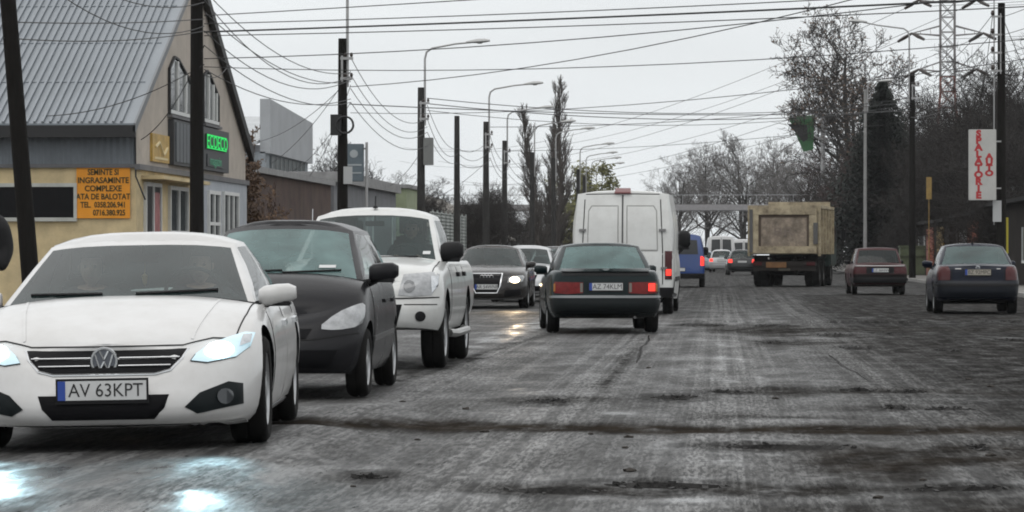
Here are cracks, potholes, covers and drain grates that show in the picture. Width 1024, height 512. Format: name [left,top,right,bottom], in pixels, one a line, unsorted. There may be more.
crack [636,335,650,363]
crack [829,355,867,380]
